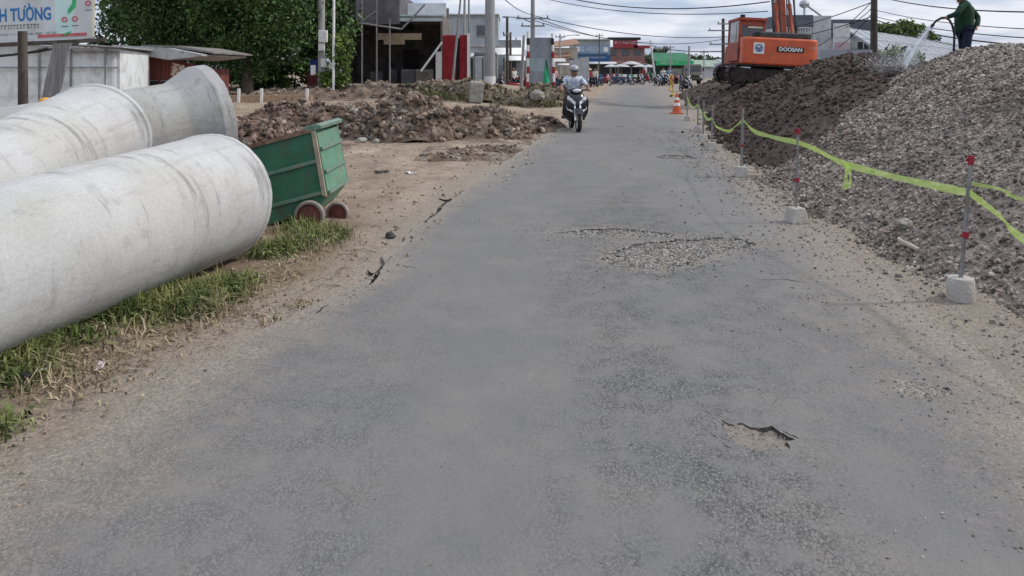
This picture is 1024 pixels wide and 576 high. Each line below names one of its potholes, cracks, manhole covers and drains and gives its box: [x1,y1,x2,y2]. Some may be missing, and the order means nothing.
pothole [601,236,756,269]
pothole [719,419,794,451]
